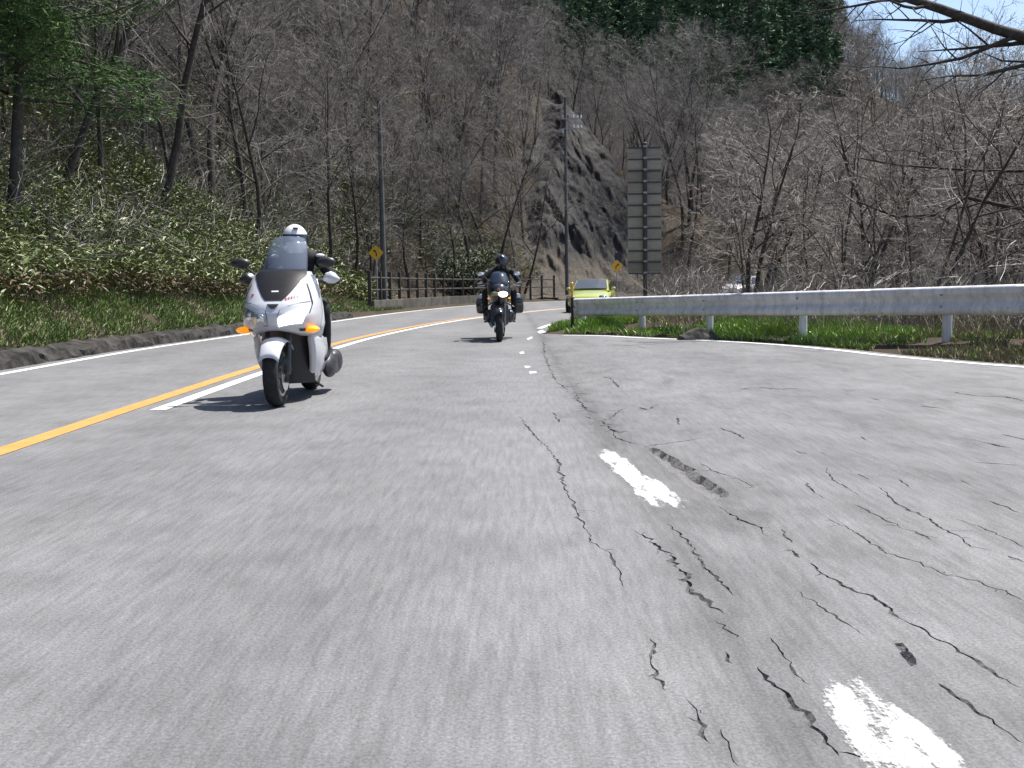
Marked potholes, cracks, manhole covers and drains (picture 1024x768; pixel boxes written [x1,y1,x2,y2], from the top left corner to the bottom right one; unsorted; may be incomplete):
crack [805,470,1024,601]
pothole [892,640,917,666]
crack [686,700,737,765]
crack [720,507,1023,743]
crack [636,525,739,663]
crack [963,434,1024,466]
crack [648,639,667,692]
crack [520,341,657,586]
